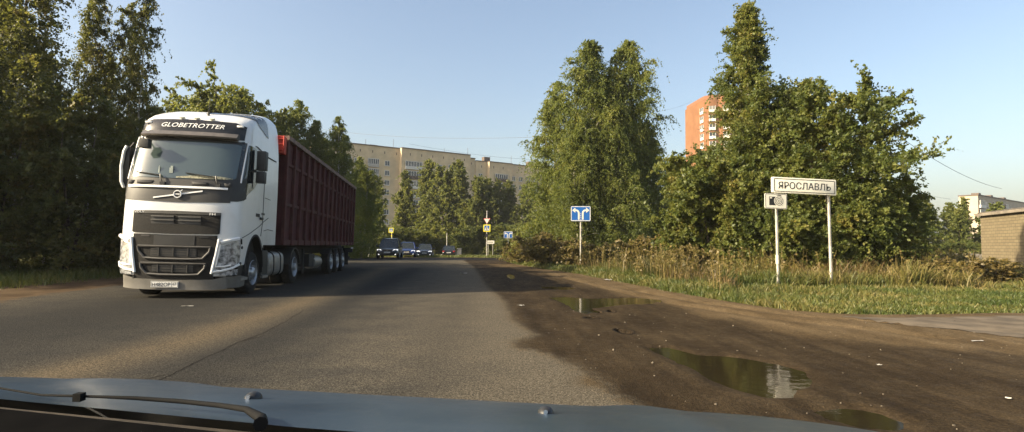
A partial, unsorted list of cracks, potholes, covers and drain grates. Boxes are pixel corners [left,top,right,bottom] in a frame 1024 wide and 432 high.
crack [146,311,302,380]
